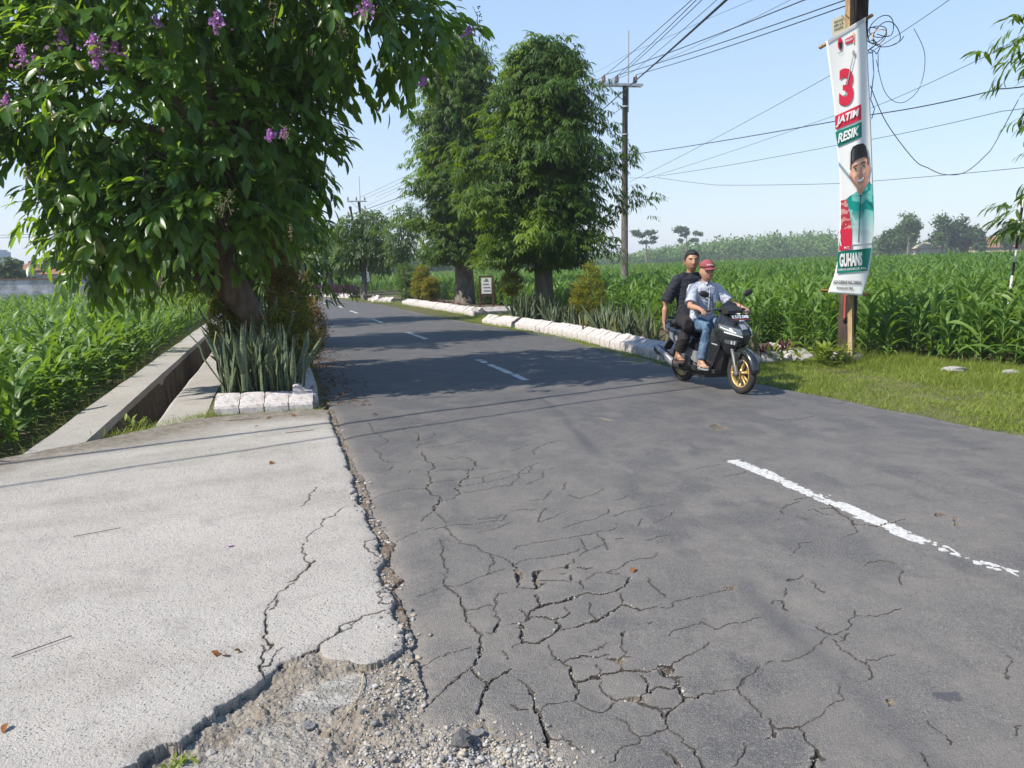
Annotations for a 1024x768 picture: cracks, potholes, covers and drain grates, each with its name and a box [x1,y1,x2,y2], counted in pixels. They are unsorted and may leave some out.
crack [369,417,763,768]
crack [302,588,394,658]
crack [921,720,953,768]
crack [771,575,826,611]
crack [259,487,349,683]
crack [765,686,845,768]
crack [766,608,902,680]
